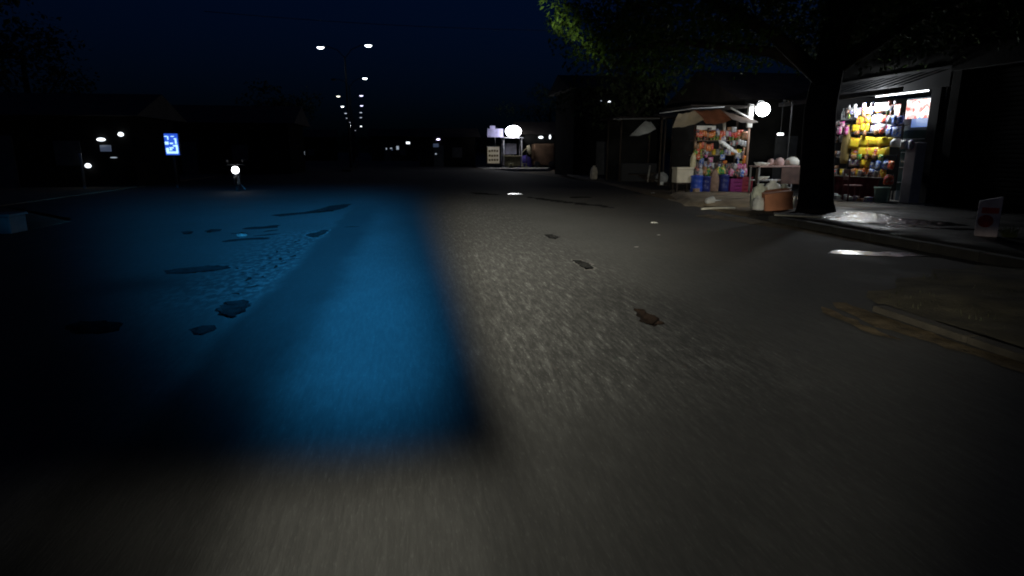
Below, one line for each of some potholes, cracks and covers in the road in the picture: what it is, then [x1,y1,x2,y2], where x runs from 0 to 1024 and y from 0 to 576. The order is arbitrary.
pothole [632,307,665,327]
pothole [571,259,597,270]
pothole [304,229,331,238]
pothole [64,320,123,334]
pothole [272,204,351,216]
pothole [189,325,217,335]
pothole [164,265,231,274]
pothole [215,299,252,318]
